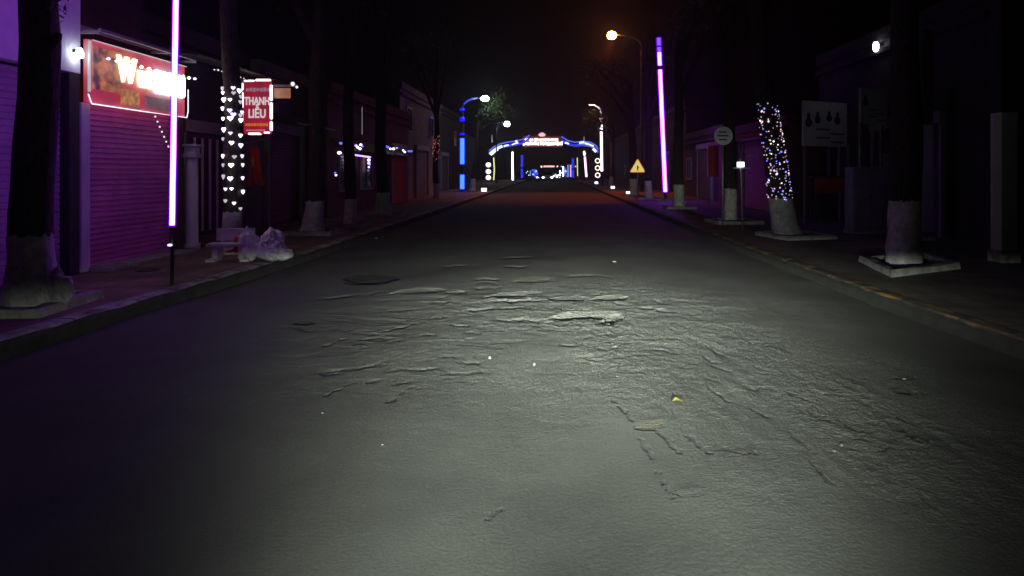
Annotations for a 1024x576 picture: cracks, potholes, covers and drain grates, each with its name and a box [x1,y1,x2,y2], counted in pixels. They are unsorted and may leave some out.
crack [316,256,697,403]
crack [702,346,733,402]
crack [637,428,756,499]
crack [875,402,922,451]
pothole [549,311,625,326]
crack [750,390,835,483]
crack [612,399,635,421]
